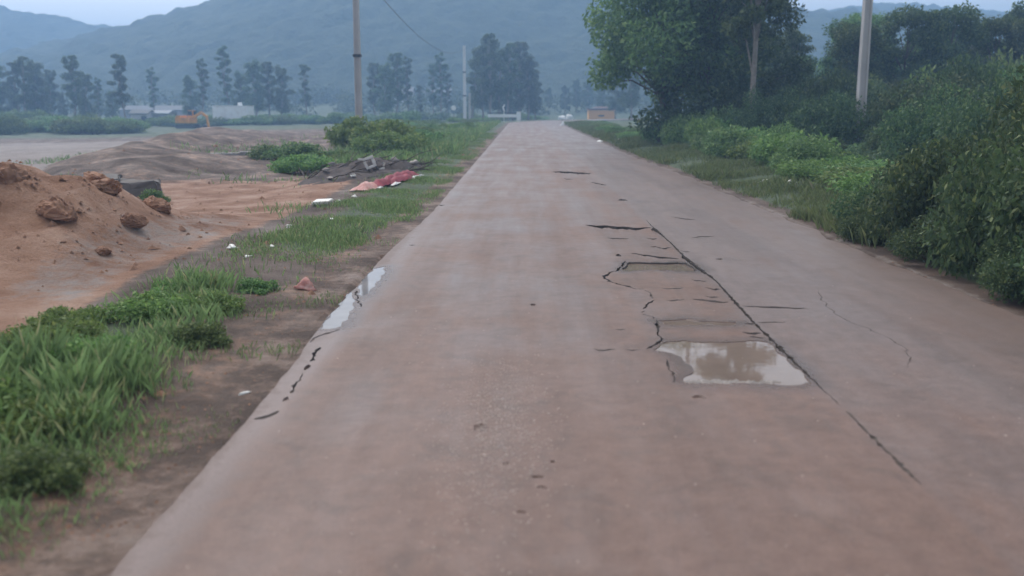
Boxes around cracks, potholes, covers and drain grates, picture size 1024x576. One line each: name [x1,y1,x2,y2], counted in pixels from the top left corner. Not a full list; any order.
crack [743,290,912,367]
crack [290,329,339,393]
pothole [655,340,809,385]
crack [551,171,604,185]
crack [587,217,728,382]
